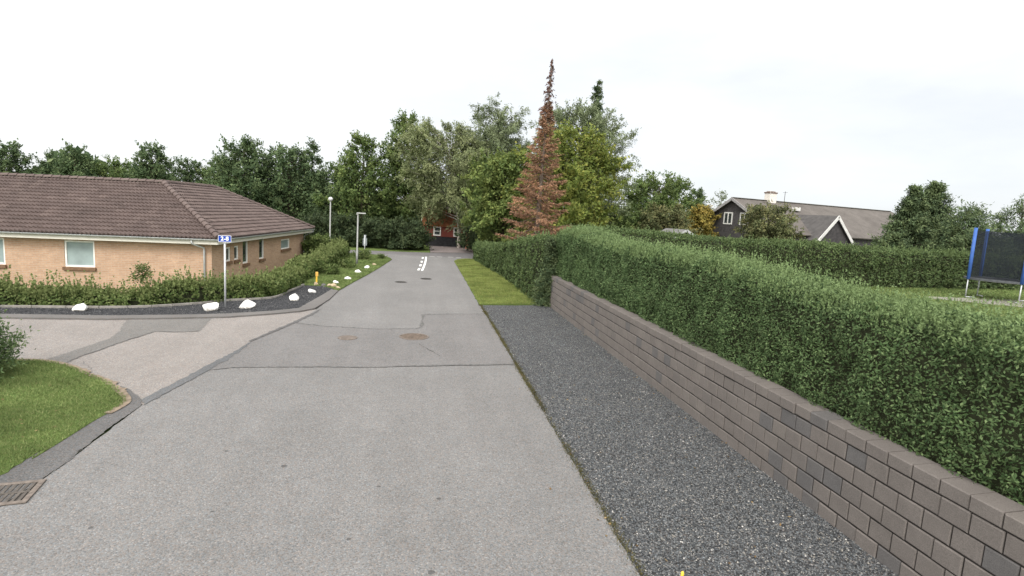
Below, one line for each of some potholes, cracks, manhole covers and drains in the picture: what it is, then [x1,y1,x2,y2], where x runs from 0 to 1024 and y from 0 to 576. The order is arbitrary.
crack [397,345,513,366]
